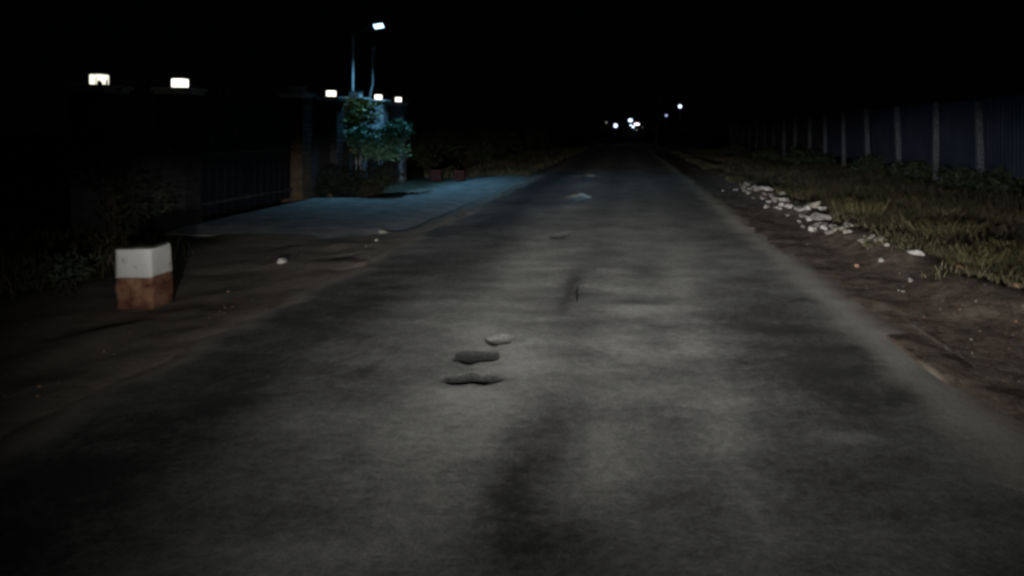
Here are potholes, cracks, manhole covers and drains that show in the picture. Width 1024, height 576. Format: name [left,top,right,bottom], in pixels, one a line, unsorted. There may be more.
pothole [440,371,507,386]
pothole [565,193,592,202]
pothole [453,349,500,365]
pothole [484,334,516,346]
